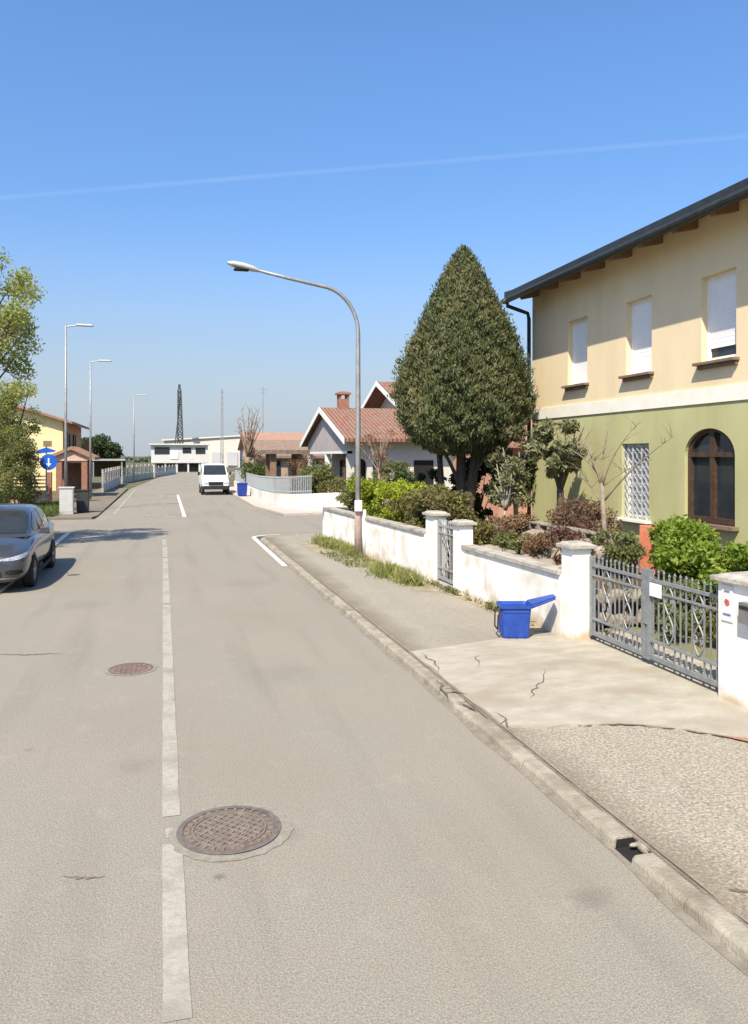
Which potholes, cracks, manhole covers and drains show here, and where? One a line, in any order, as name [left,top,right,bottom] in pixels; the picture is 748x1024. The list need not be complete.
manhole cover [104,662,157,676]
crack [421,653,516,730]
manhole cover [168,803,294,862]
